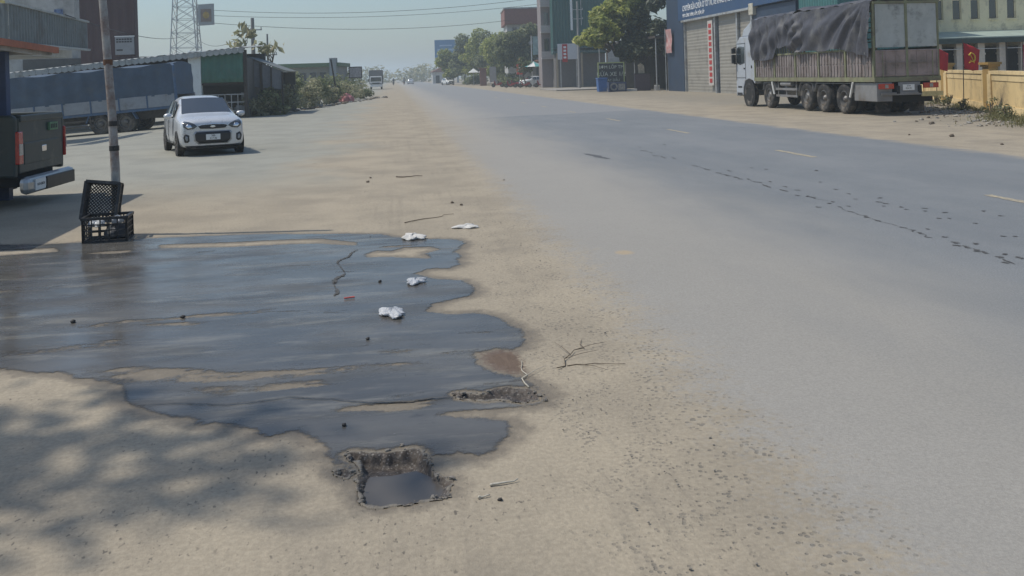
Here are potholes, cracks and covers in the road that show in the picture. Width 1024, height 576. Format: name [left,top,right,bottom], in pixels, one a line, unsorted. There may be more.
pothole [343,443,455,510]
pothole [450,386,548,404]
crack [641,144,1023,264]
crack [332,250,356,295]
pothole [331,467,356,480]
